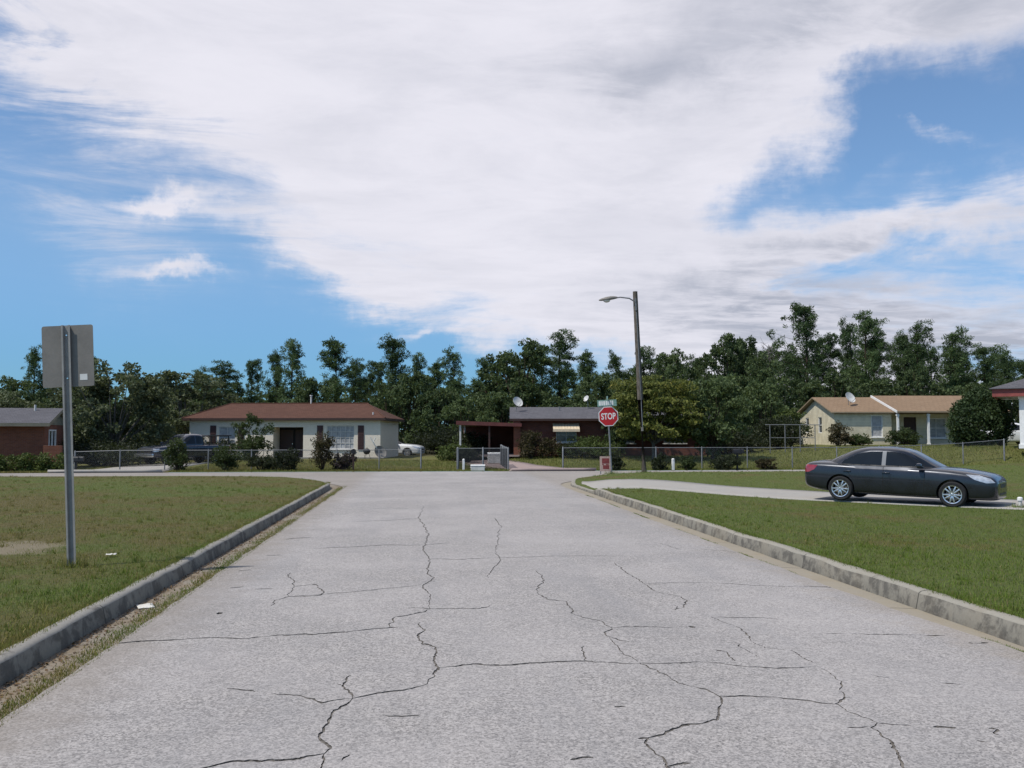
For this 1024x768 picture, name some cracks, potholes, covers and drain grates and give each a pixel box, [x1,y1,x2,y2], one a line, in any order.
crack [122,507,912,768]
